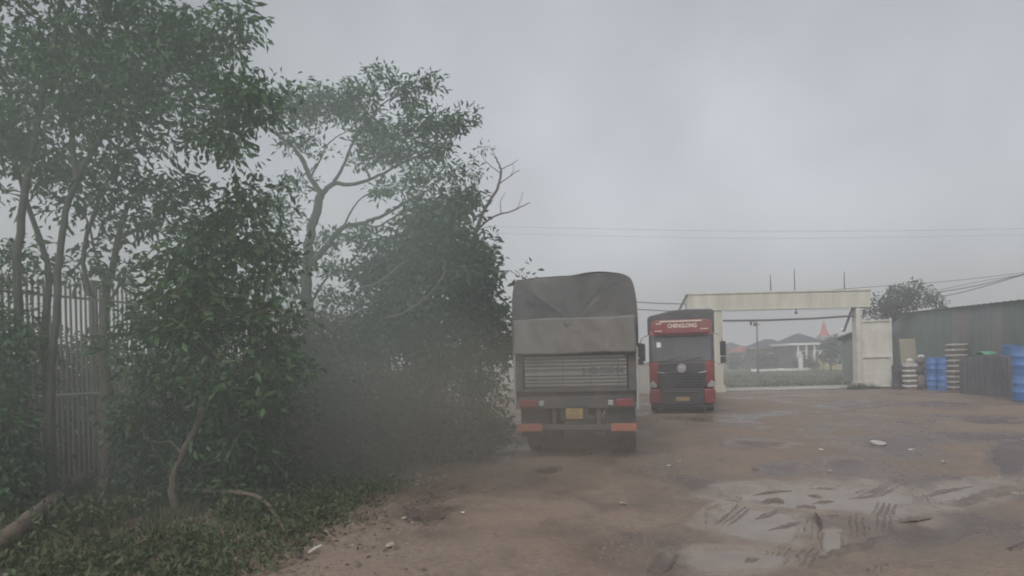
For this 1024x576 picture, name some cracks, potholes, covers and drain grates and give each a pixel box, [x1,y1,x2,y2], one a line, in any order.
pothole [693,496,742,526]
pothole [723,440,791,448]
pothole [821,530,843,553]
pothole [716,481,936,516]
pothole [705,503,809,547]
pothole [675,544,798,575]
pothole [648,544,682,573]
pothole [533,465,561,474]
pothole [403,502,450,524]
